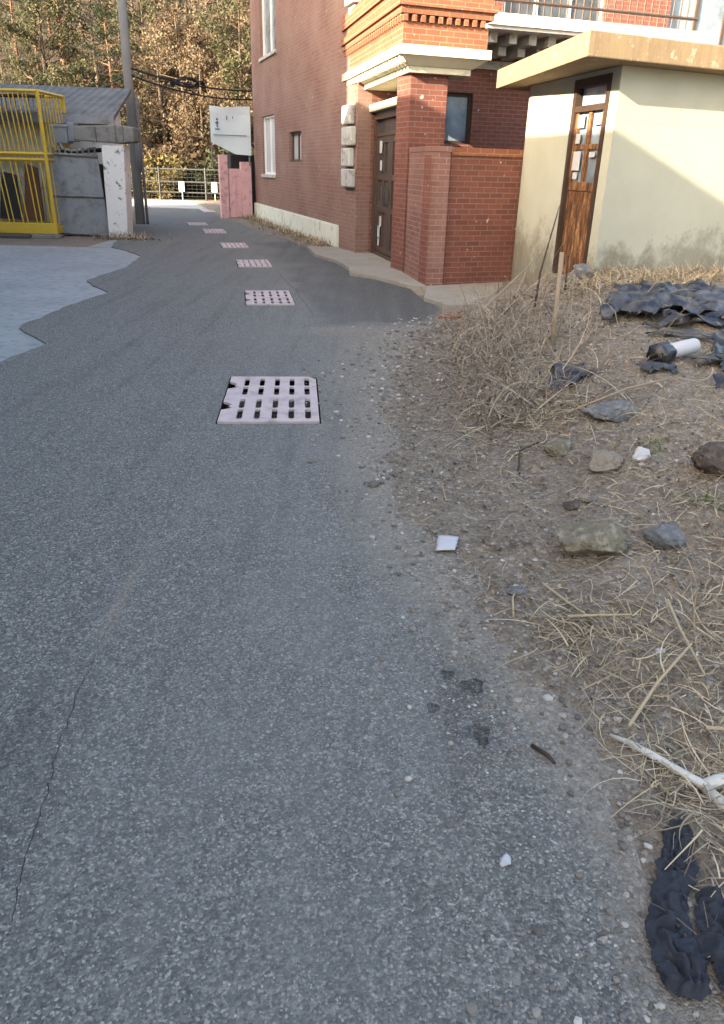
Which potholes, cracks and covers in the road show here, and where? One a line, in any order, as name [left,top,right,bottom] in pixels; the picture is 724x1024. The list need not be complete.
crack [12,599,122,922]
